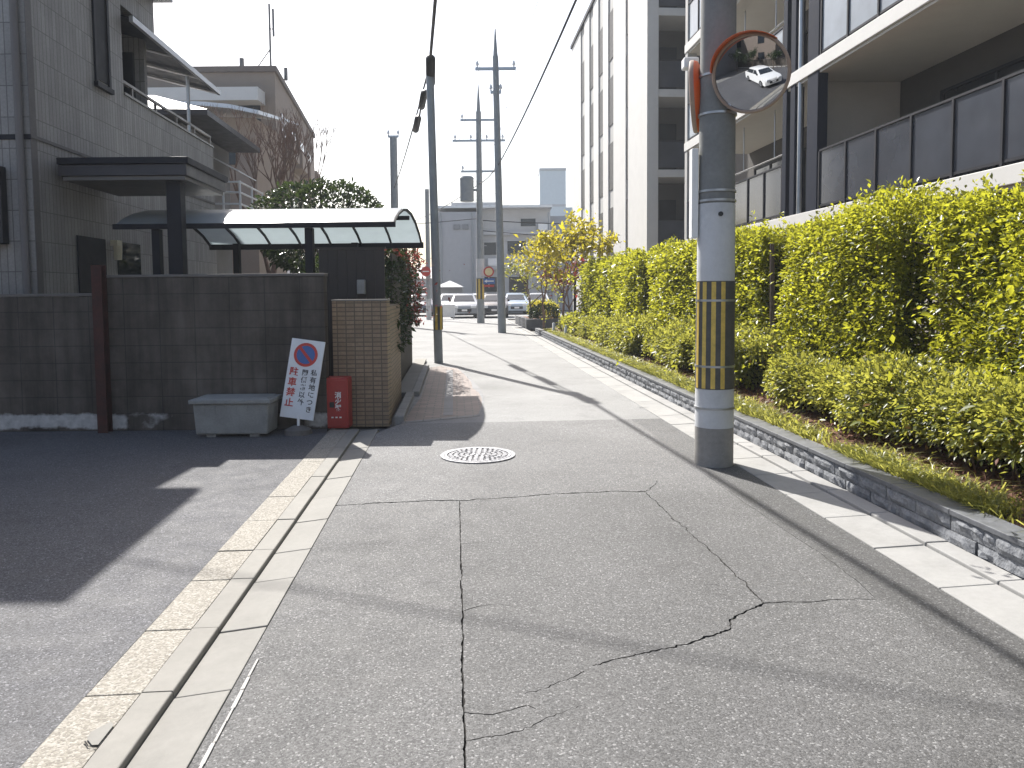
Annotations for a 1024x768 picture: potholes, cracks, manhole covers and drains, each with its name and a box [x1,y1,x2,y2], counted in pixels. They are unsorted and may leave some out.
manhole cover [440,447,515,464]
crack [336,481,877,768]
